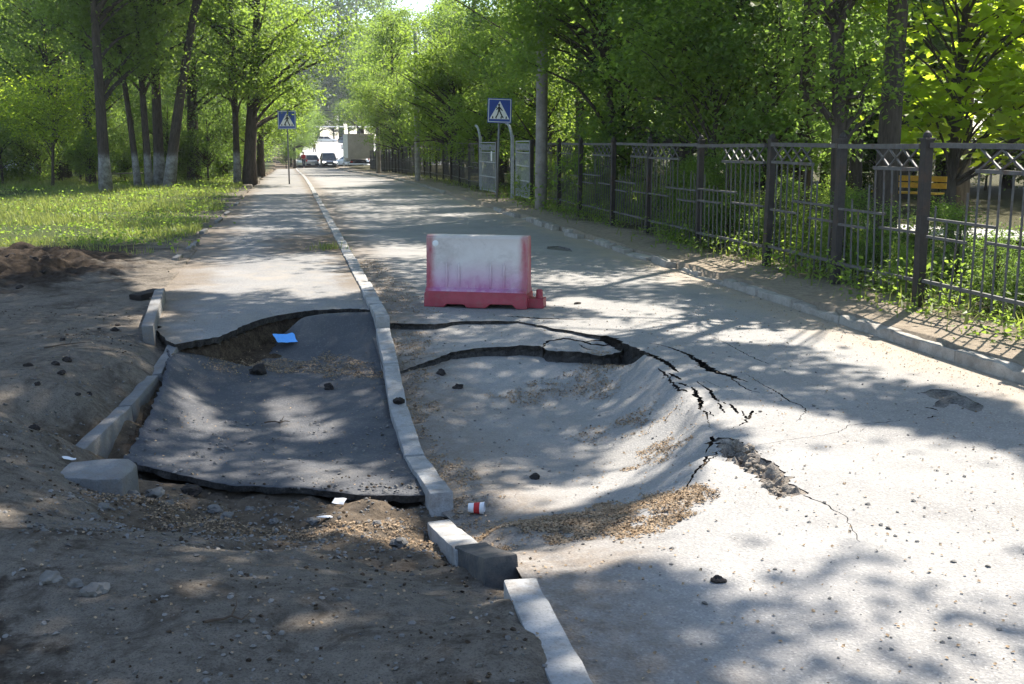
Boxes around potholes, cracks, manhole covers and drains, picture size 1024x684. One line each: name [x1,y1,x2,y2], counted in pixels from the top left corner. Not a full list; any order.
pothole [712,437,808,500]
pothole [373,321,724,580]
crack [803,495,860,542]
crack [646,330,807,453]
pothole [920,389,984,413]
pothole [123,312,425,503]
